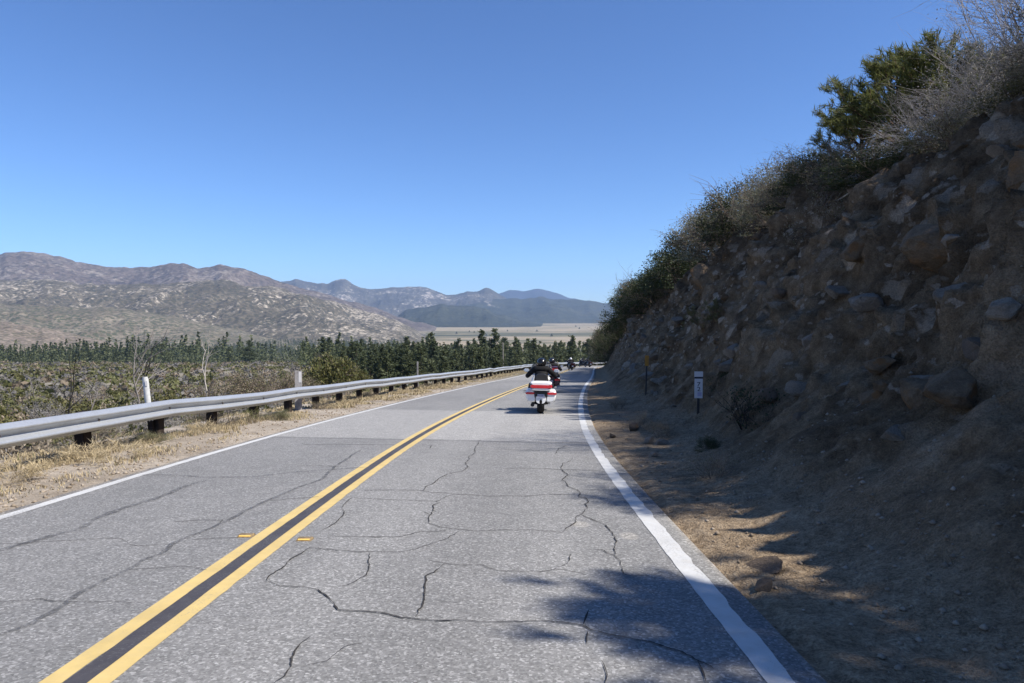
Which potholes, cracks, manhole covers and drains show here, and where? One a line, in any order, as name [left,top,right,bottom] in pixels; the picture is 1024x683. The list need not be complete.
crack [0,444,373,633]
crack [266,441,713,681]
